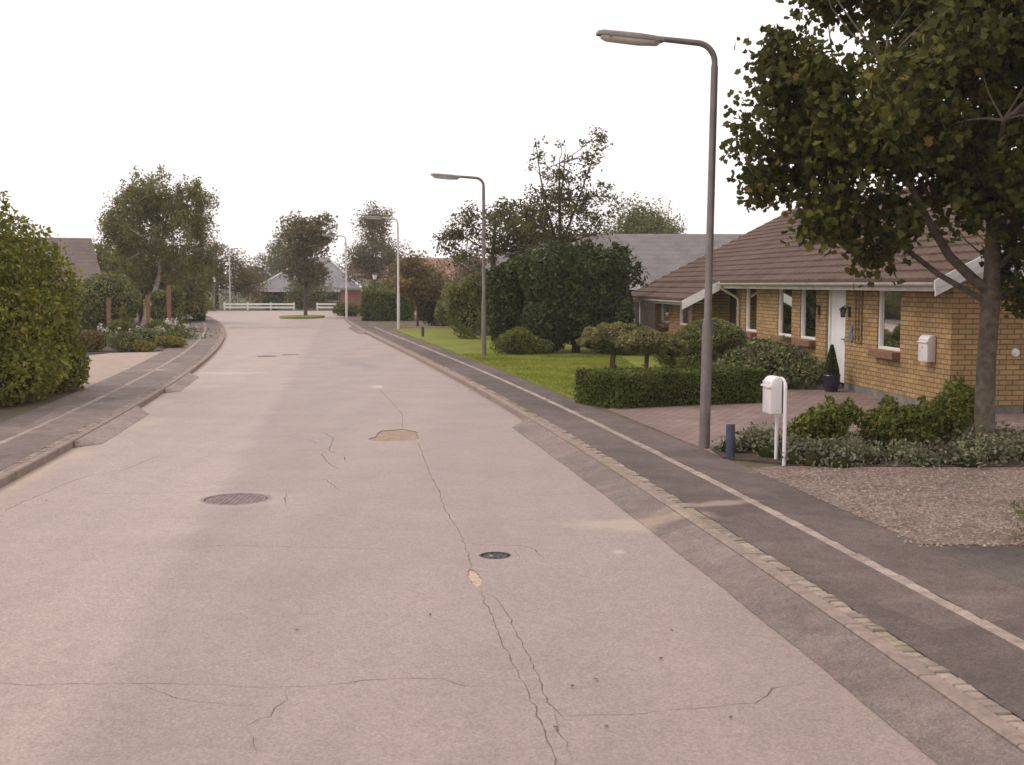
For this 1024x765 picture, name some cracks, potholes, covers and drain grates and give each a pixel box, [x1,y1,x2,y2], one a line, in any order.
manhole cover [199,493,272,505]
crack [3,394,859,765]
pothole [370,429,419,441]
pothole [467,569,482,588]
